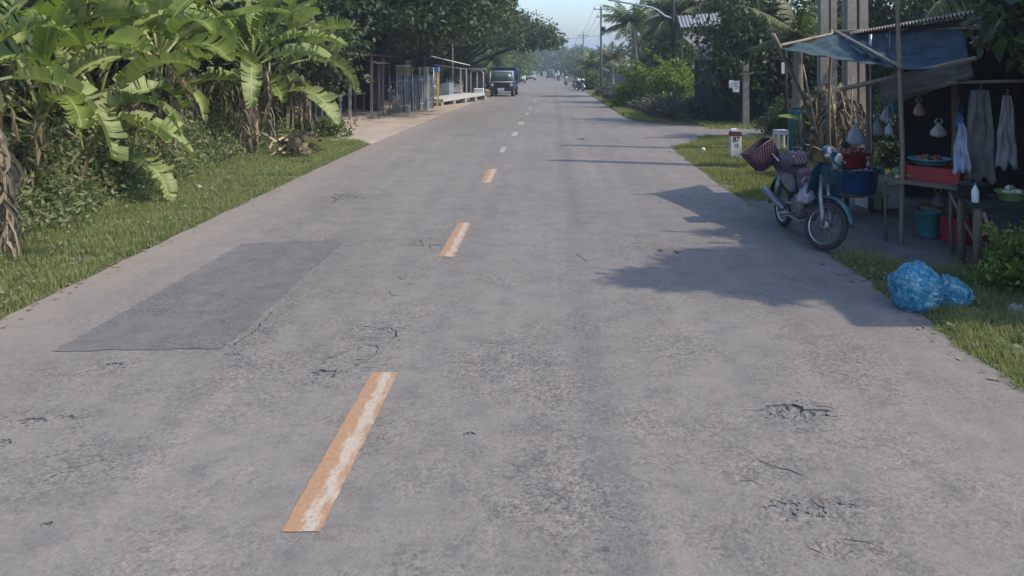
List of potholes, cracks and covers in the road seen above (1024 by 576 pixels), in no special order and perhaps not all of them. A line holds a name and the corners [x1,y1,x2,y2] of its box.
pothole [803,500,827,518]
pothole [17,416,57,426]
pothole [744,401,836,422]
crack [722,447,802,486]
pothole [306,370,344,378]
crack [319,324,407,371]
pothole [758,500,800,521]
